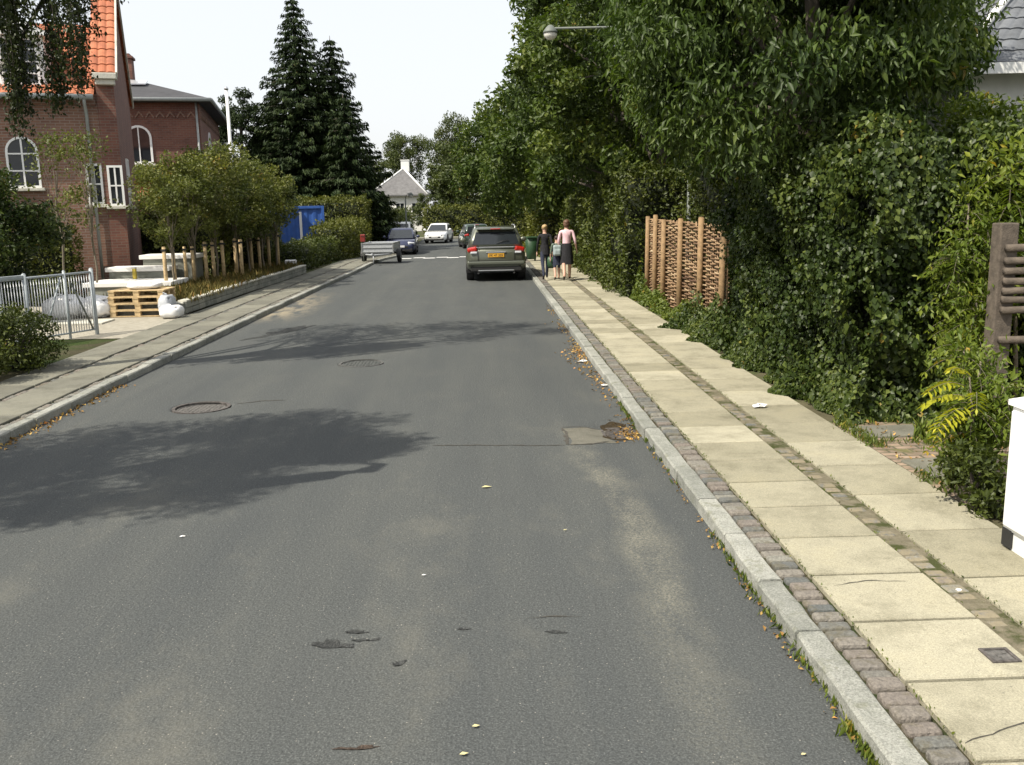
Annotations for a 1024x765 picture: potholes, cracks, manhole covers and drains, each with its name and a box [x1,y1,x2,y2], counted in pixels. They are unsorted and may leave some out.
utility cover [978,647,1022,663]
crack [965,722,1024,743]
pothole [311,639,354,648]
manhole cover [172,401,231,414]
manhole cover [339,359,384,367]
